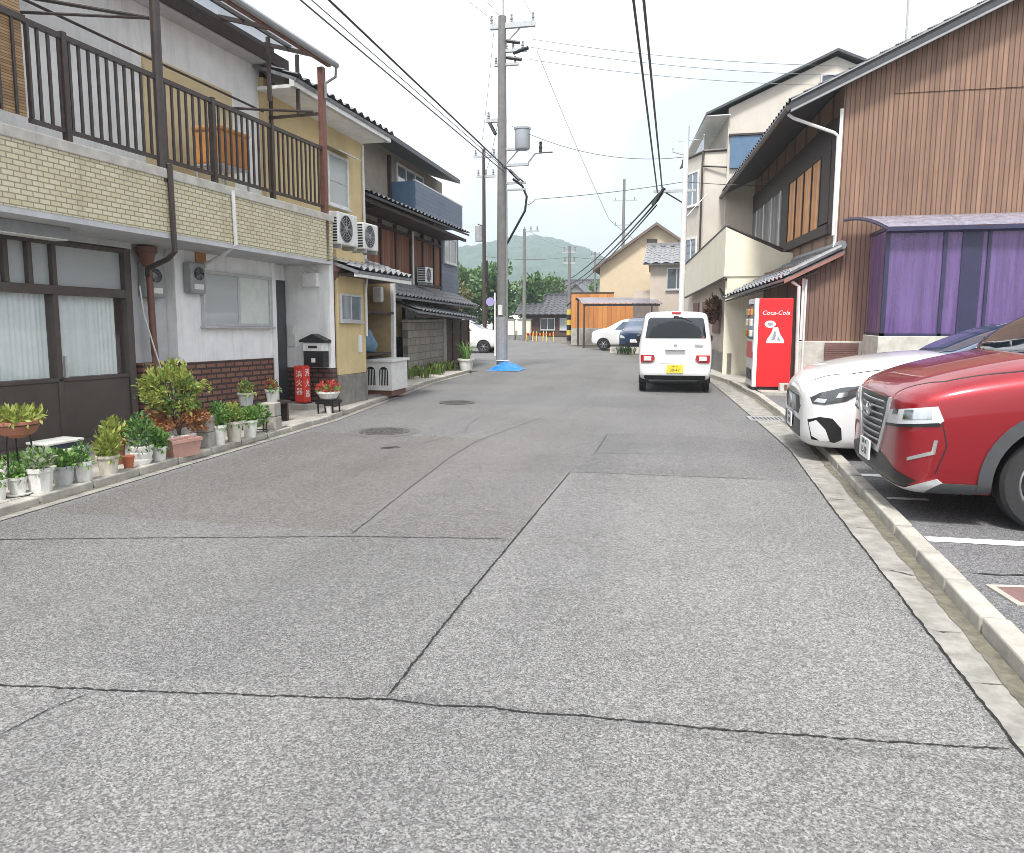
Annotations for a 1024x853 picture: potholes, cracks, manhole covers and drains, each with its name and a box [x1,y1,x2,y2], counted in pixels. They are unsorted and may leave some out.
manhole cover [348,426,420,437]
crack [0,684,1009,749]
